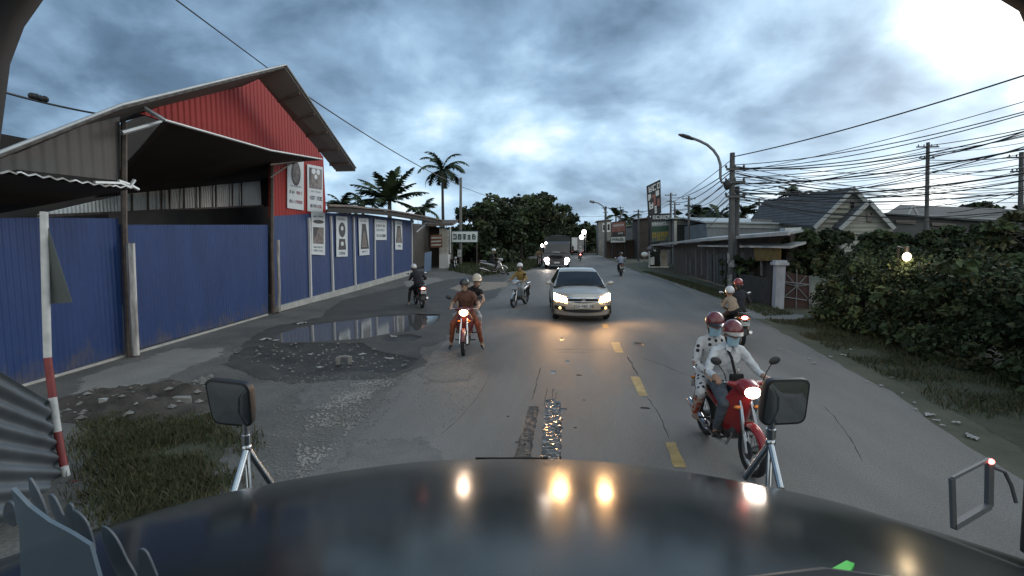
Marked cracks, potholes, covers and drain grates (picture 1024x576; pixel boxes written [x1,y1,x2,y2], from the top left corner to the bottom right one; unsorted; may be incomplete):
pothole [233,343,418,377]
pothole [272,313,440,343]
